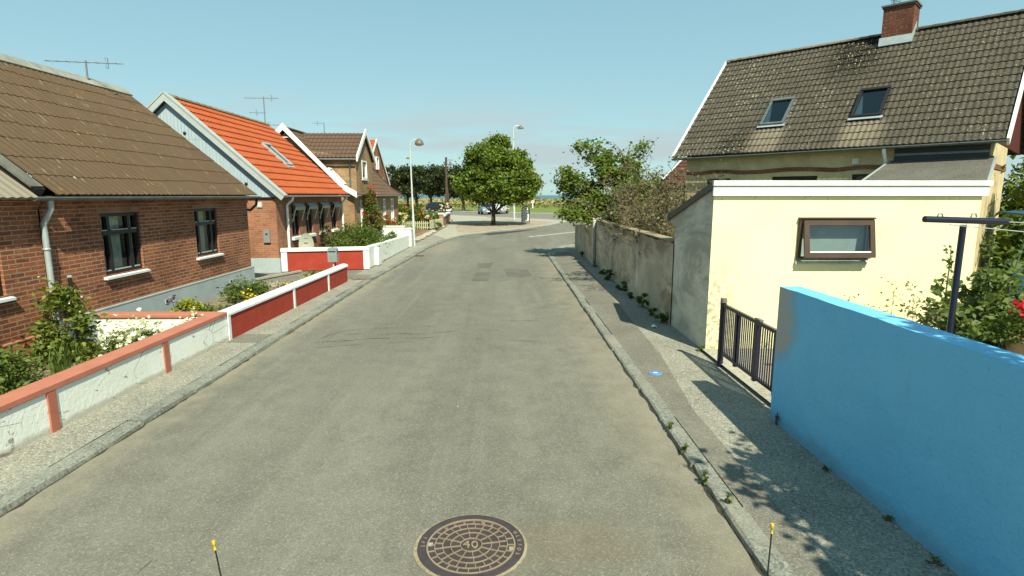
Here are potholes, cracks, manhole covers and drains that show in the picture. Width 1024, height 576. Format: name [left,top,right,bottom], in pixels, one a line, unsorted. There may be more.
manhole cover [413,514,527,576]
